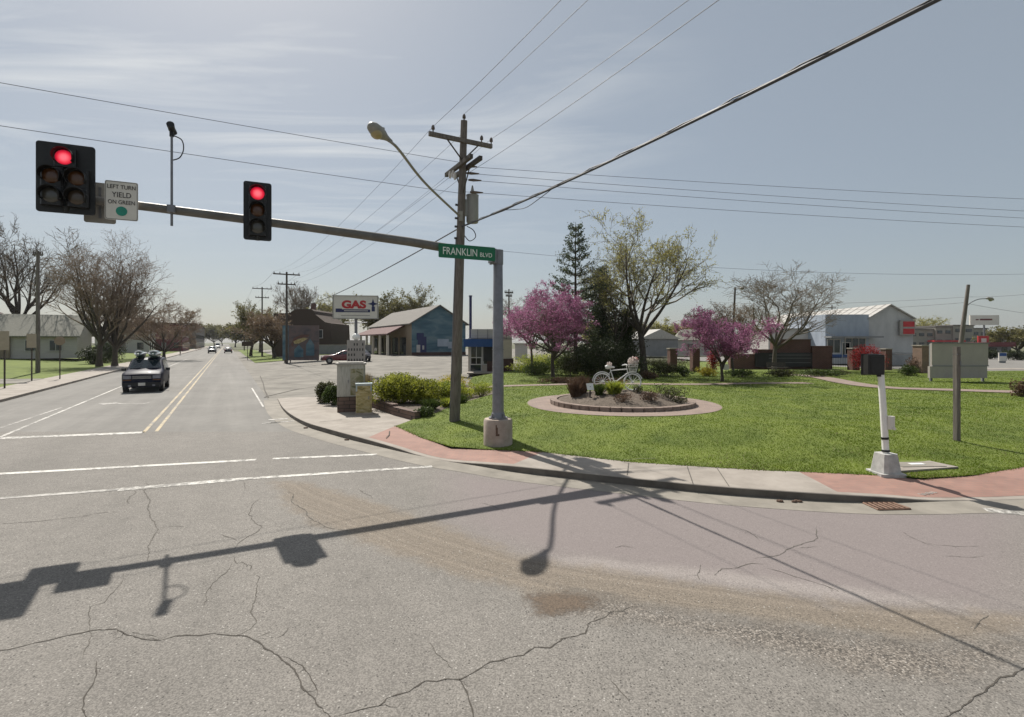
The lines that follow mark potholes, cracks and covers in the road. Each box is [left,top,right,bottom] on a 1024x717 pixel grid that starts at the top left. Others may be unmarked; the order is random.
drain grate [863,502,911,511]
crack [5,485,331,717]
crack [697,526,838,591]
crack [337,606,631,717]
